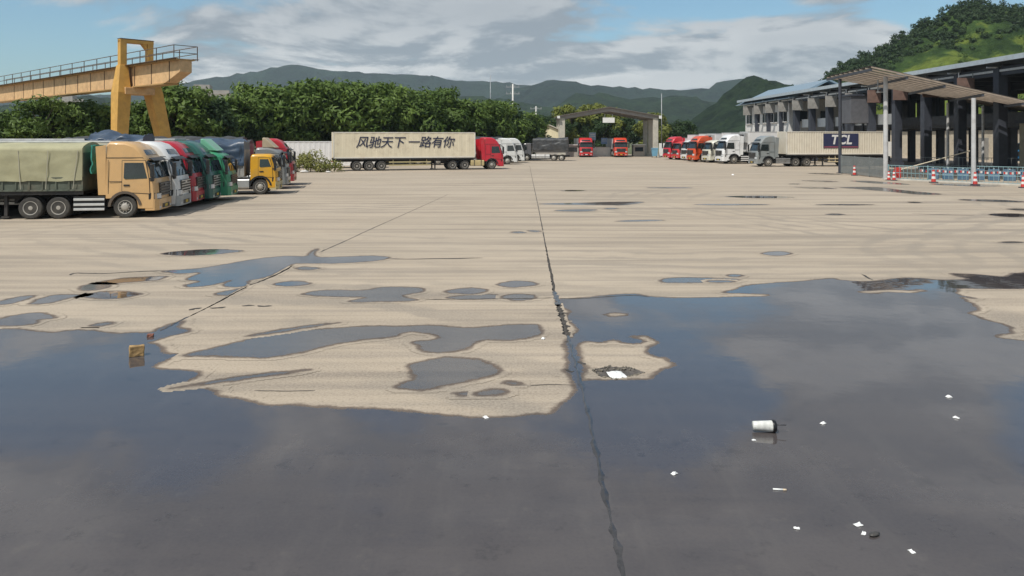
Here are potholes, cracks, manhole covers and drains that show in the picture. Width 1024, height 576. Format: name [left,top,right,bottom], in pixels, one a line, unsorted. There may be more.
crack [435,169,648,576]
pothole [592,365,645,380]
